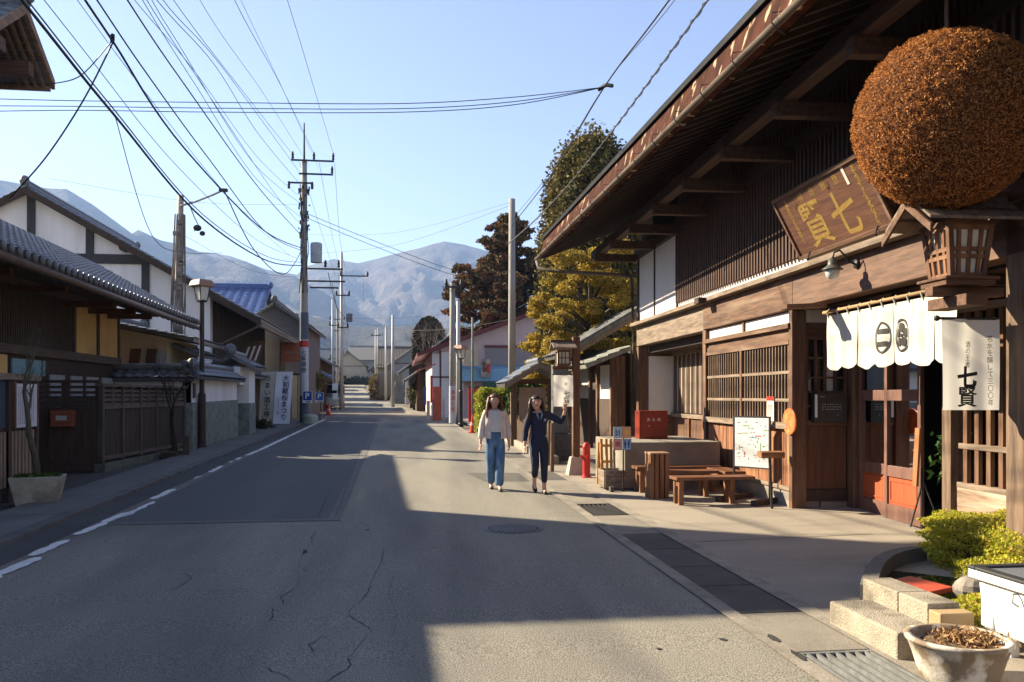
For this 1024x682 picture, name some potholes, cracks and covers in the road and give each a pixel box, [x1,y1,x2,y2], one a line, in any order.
manhole cover [484,523,542,533]
drain grate [799,649,928,682]
crack [87,459,400,682]
drain grate [577,503,629,516]
